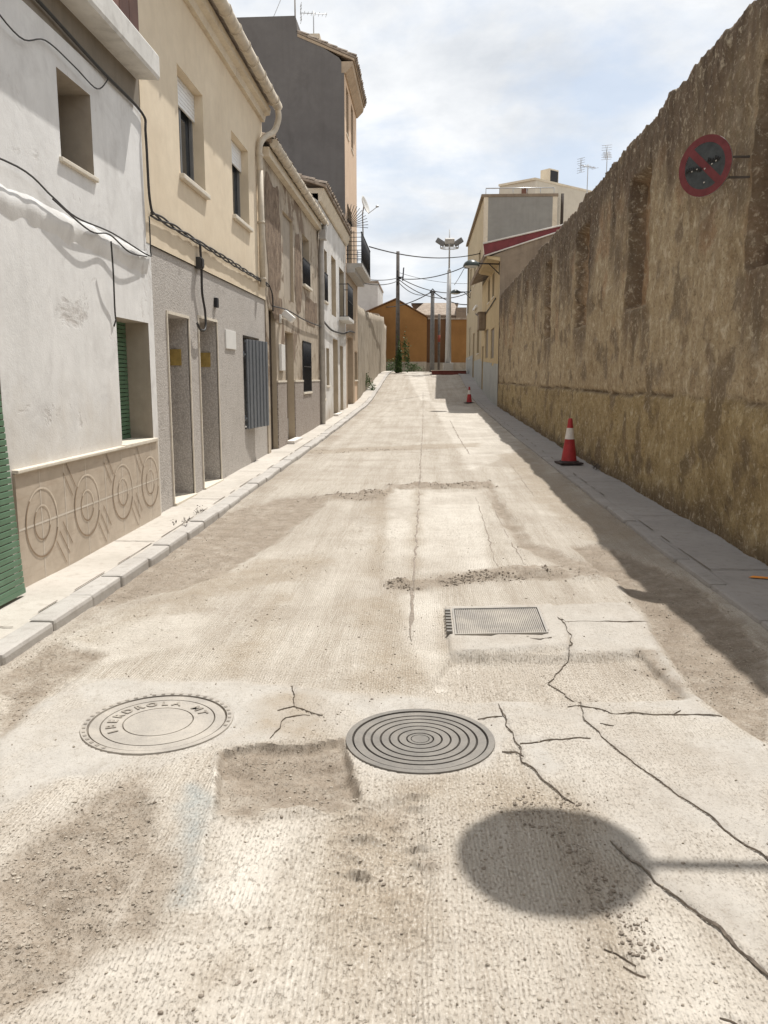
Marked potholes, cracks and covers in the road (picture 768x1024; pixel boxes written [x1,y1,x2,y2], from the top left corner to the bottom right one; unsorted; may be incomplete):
crack [478,617,768,979]
manhole cover [80,693,233,756]
crack [476,500,523,563]
crack [270,686,323,738]
manhole cover [346,709,495,774]
crack [409,397,469,641]
